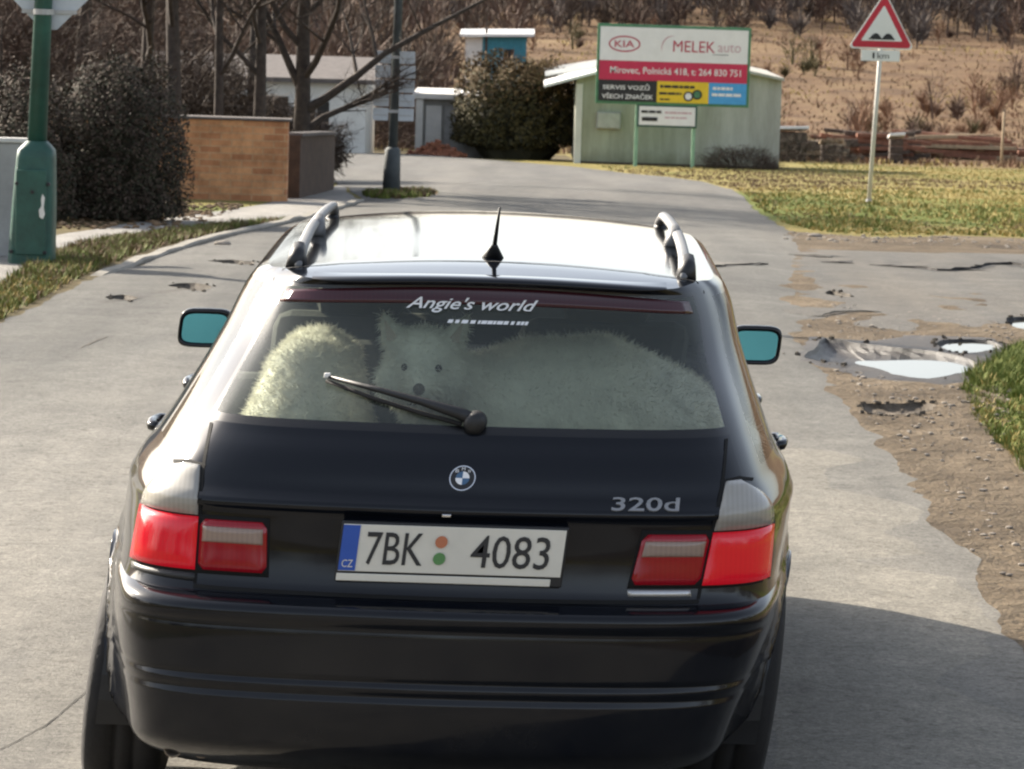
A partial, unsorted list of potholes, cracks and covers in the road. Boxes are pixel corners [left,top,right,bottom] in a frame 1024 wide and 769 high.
crack [788,254,1024,272]
pothole [105,294,137,302]
crack [1,691,86,749]
pothole [168,282,216,292]
pothole [1005,314,1024,329]
pothole [782,336,984,379]
pothole [857,399,947,418]
pothole [930,335,1007,355]
